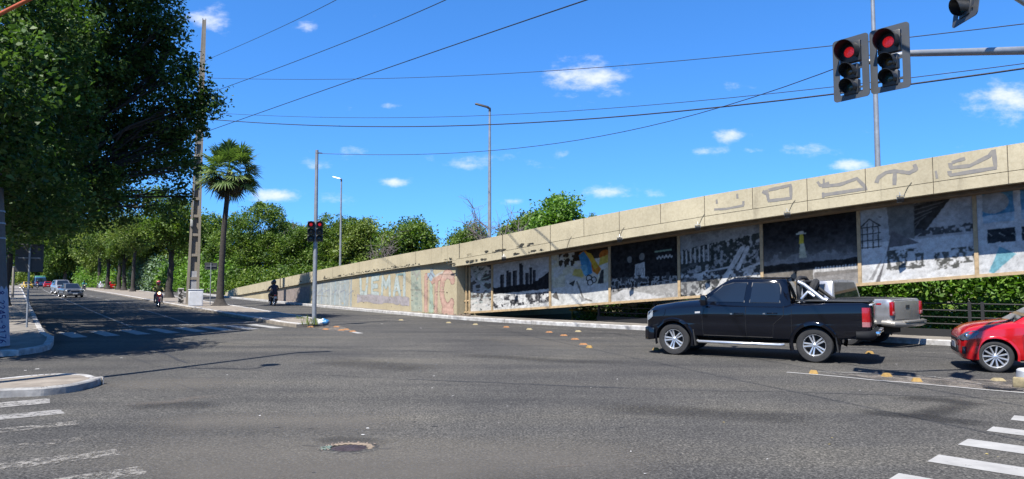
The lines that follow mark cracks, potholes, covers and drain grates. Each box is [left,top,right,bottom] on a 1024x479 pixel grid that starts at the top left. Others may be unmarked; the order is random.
manhole cover [318,441,380,455]
